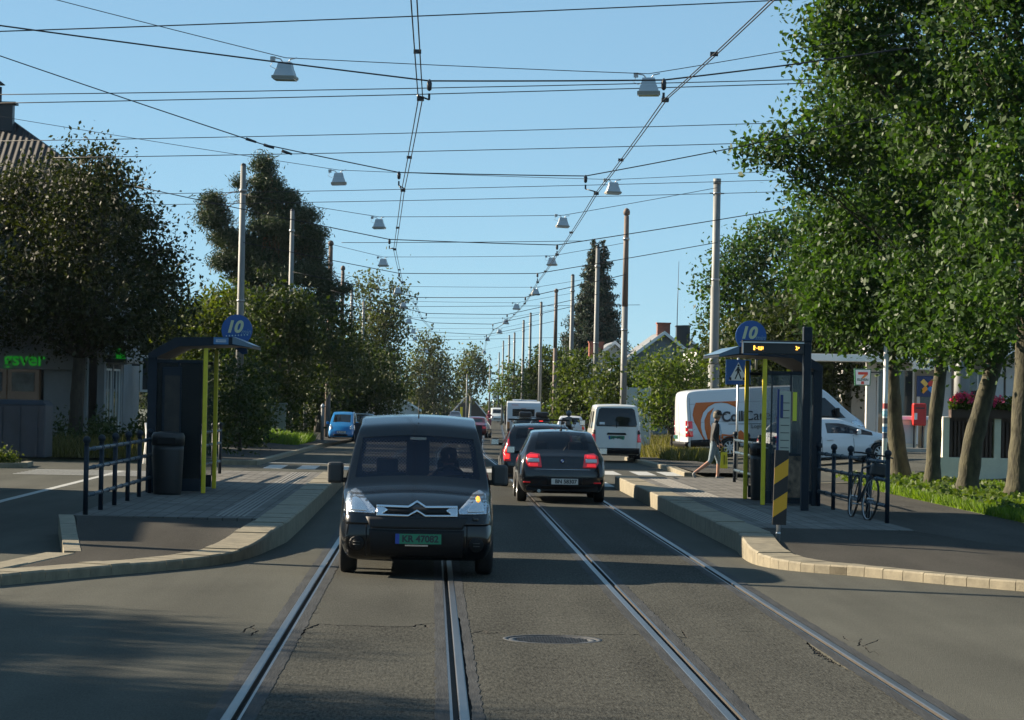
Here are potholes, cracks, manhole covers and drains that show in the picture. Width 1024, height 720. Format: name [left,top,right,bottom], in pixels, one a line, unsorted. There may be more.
crack [301,608,434,635]
manhole cover [503,635,602,644]
crack [843,636,881,656]
